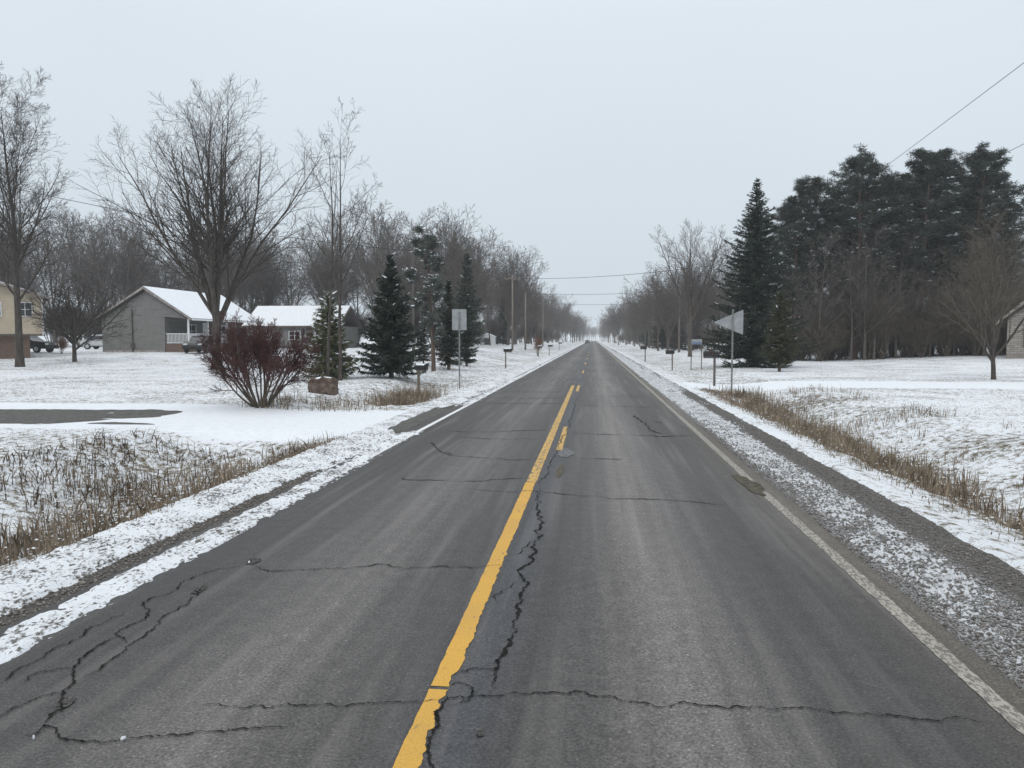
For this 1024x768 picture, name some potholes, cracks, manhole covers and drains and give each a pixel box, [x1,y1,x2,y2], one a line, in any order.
crack [0,565,286,743]
crack [208,396,987,768]
